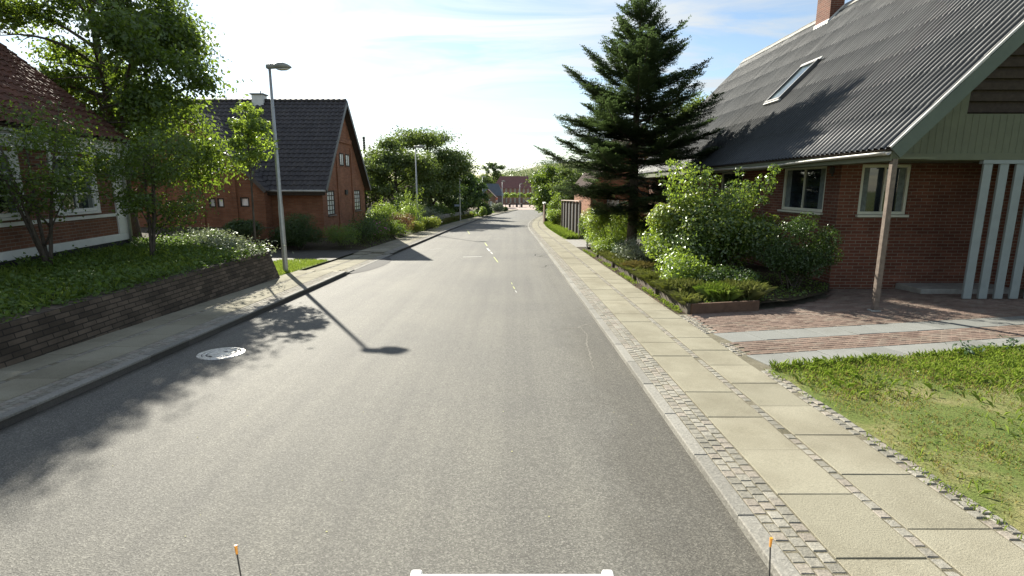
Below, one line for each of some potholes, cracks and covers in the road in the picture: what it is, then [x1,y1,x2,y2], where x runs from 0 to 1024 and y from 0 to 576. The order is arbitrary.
crack [562,307,594,370]
manhole cover [196,347,246,360]
